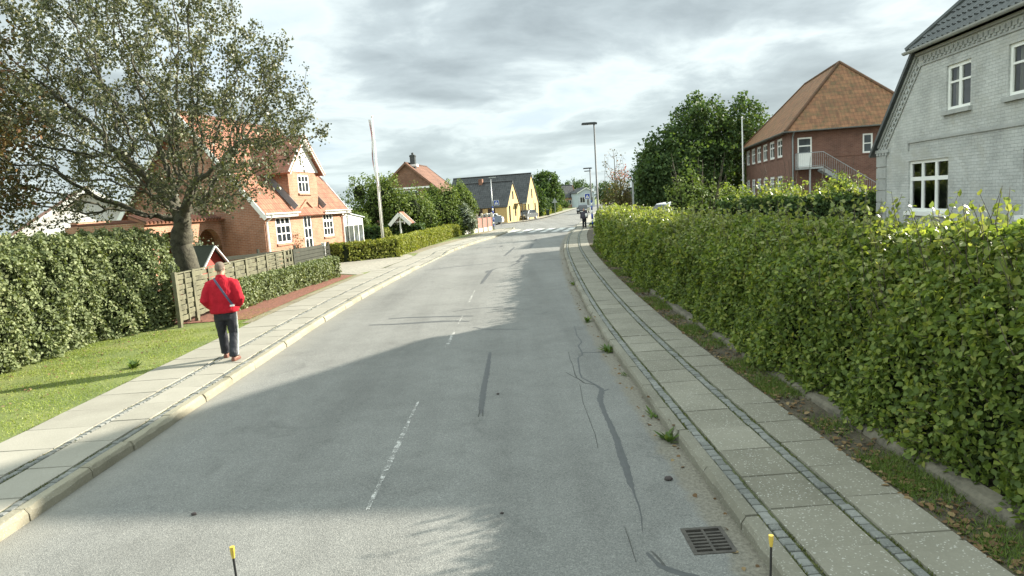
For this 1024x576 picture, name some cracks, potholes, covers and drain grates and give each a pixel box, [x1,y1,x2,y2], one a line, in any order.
drain grate [680,526,738,555]
